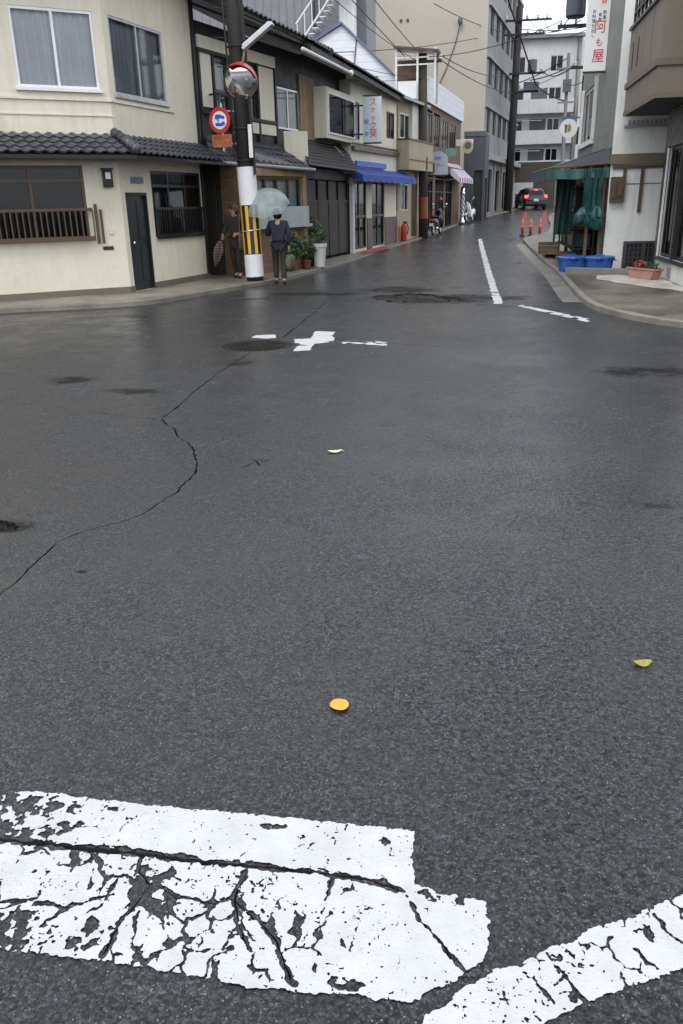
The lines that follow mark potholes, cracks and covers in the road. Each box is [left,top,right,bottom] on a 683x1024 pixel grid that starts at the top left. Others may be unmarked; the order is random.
crack [0,352,251,594]
crack [0,838,464,984]
pothole [0,520,20,532]
manhole cover [222,340,293,359]
